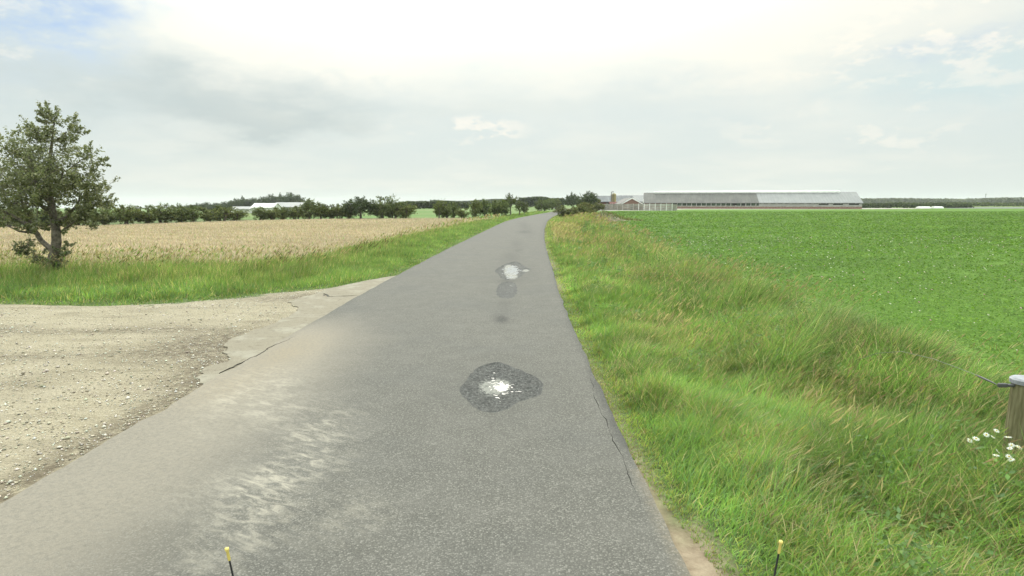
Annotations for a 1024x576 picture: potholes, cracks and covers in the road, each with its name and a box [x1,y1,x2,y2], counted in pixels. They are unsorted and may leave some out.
crack [591,382,640,499]
pothole [495,262,531,280]
crack [219,340,287,374]
pothole [460,362,543,413]
